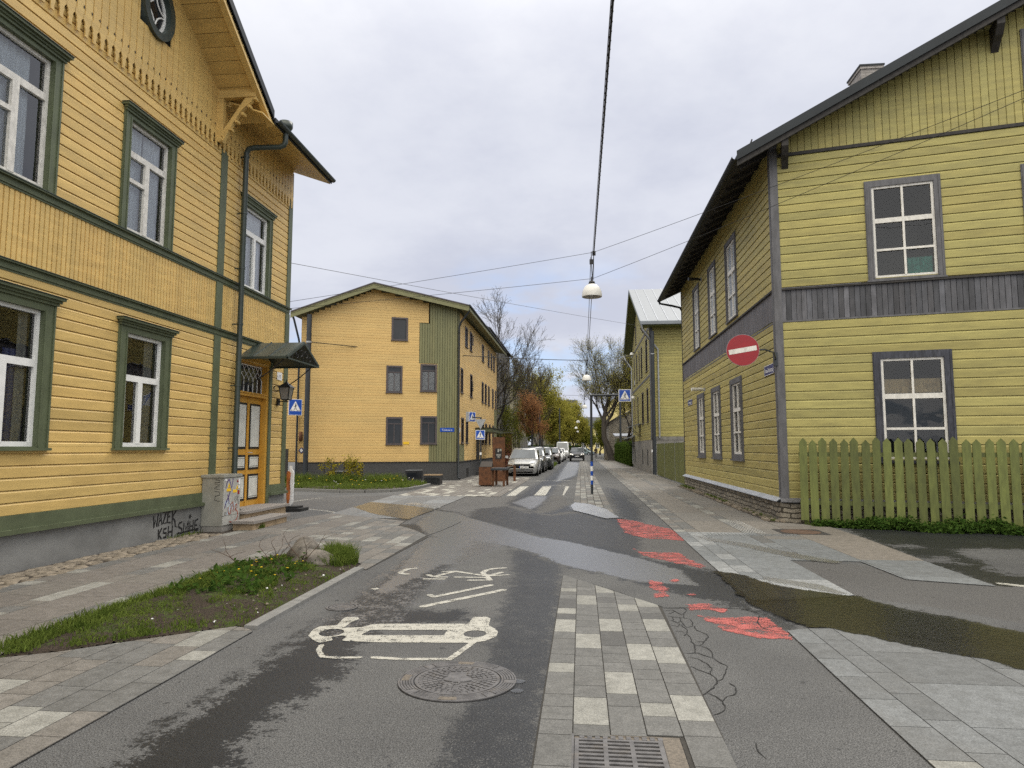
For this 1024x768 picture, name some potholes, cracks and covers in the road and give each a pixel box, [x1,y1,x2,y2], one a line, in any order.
drain grate [569,733,689,768]
manhole cover [325,603,358,611]
crack [670,608,737,715]
manhole cover [397,661,517,703]
